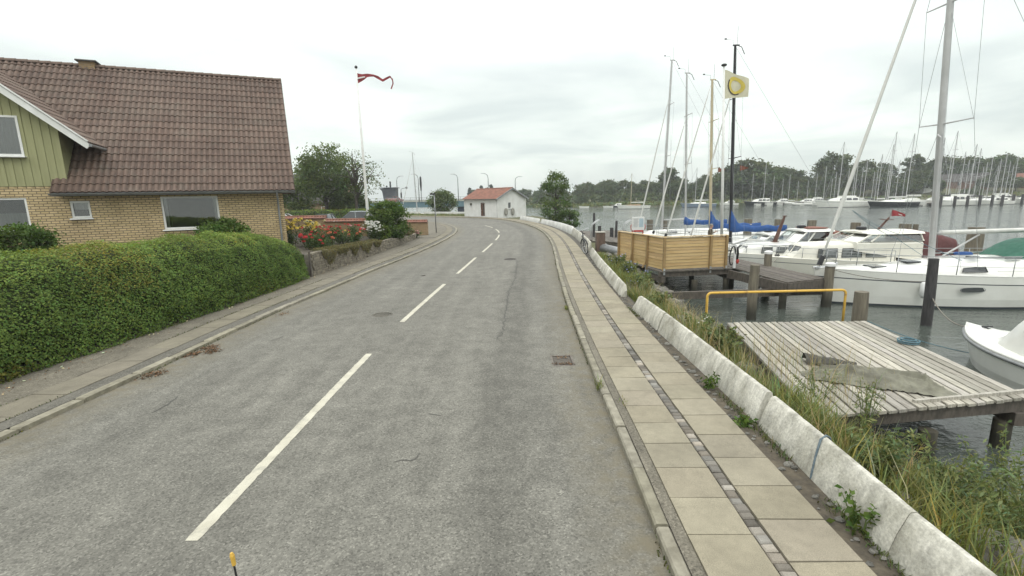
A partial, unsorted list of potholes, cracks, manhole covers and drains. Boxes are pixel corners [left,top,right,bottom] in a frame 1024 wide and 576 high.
crack [497,261,519,339]
